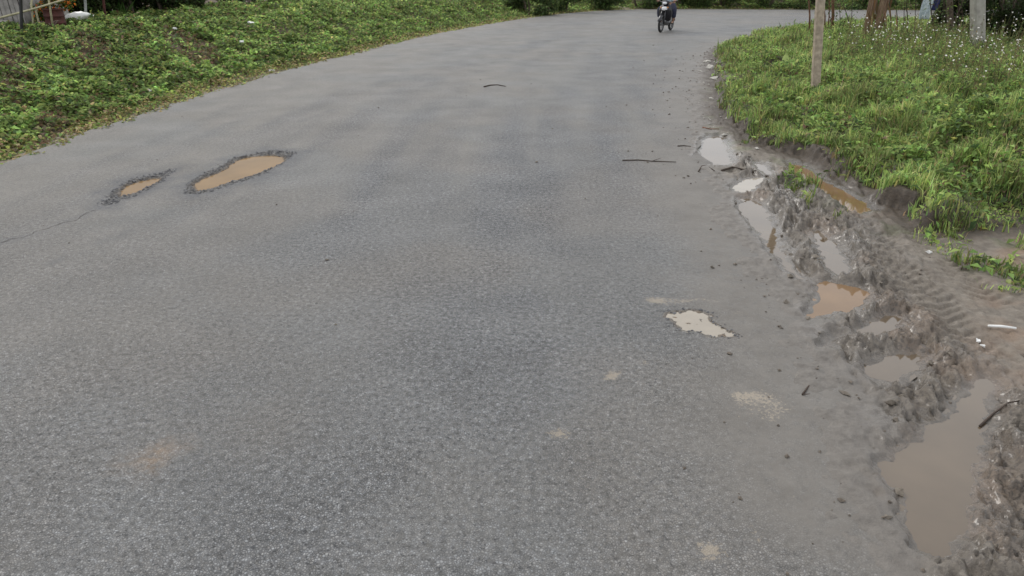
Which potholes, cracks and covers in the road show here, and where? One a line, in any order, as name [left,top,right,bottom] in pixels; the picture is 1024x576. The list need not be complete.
pothole [660,308,740,338]
pothole [184,149,297,194]
pothole [97,168,177,206]
